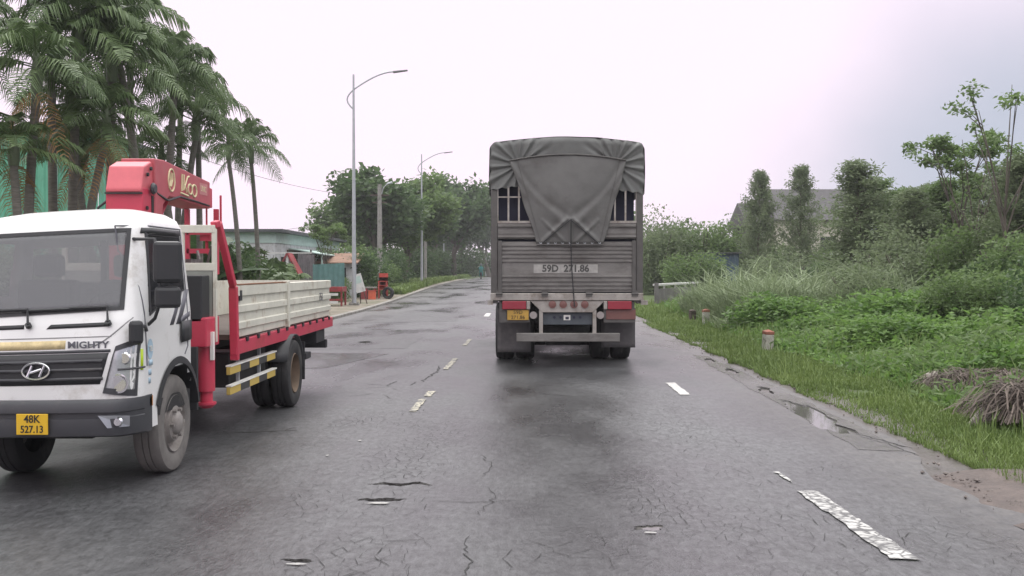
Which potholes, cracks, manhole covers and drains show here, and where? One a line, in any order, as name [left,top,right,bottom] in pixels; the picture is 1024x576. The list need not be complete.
pothole [782,400,859,434]
crack [857,434,919,456]
crack [301,381,499,480]
crack [255,455,512,576]
crack [530,536,658,576]
crack [591,392,886,576]
